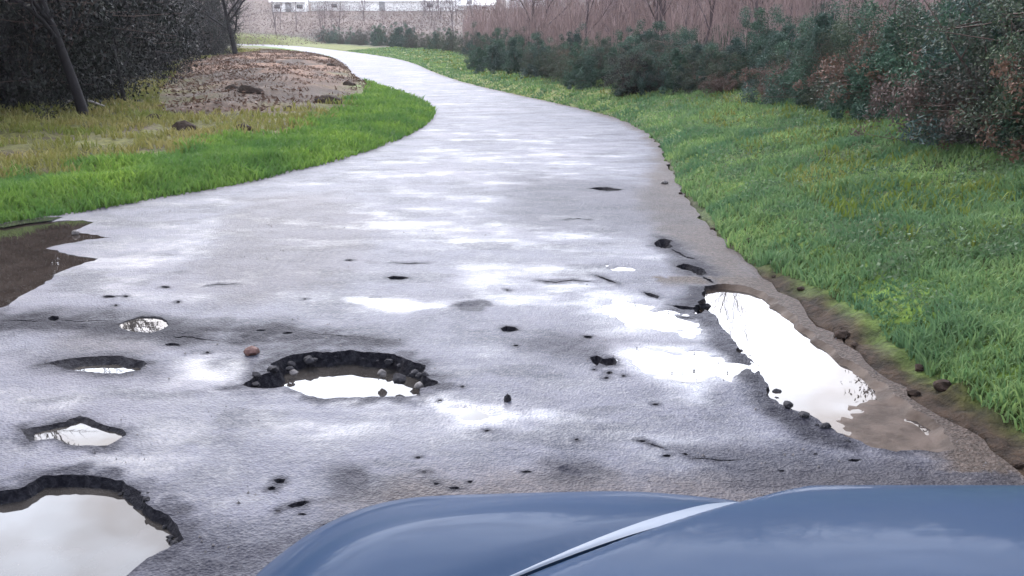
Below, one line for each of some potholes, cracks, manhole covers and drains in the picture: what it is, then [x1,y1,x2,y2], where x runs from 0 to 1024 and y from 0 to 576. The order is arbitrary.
pothole [0,474,184,576]
pothole [117,316,169,333]
pothole [38,356,147,374]
pothole [21,416,126,448]
pothole [240,350,440,399]
pothole [698,284,957,453]
